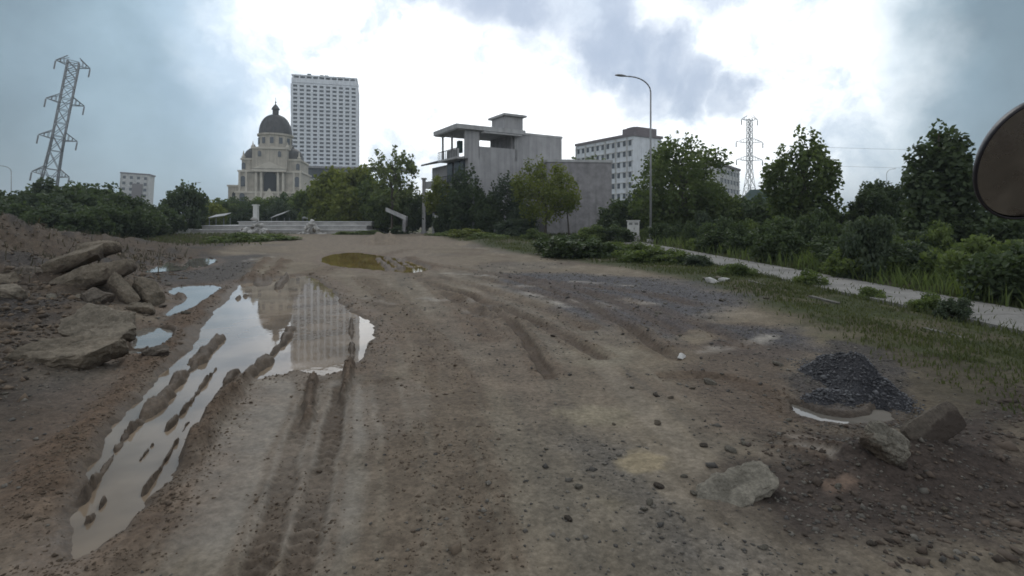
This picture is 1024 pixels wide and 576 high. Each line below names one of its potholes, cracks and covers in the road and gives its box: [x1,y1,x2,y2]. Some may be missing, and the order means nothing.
pothole [38,272,385,571]
pothole [314,252,437,273]
pothole [785,397,905,426]
